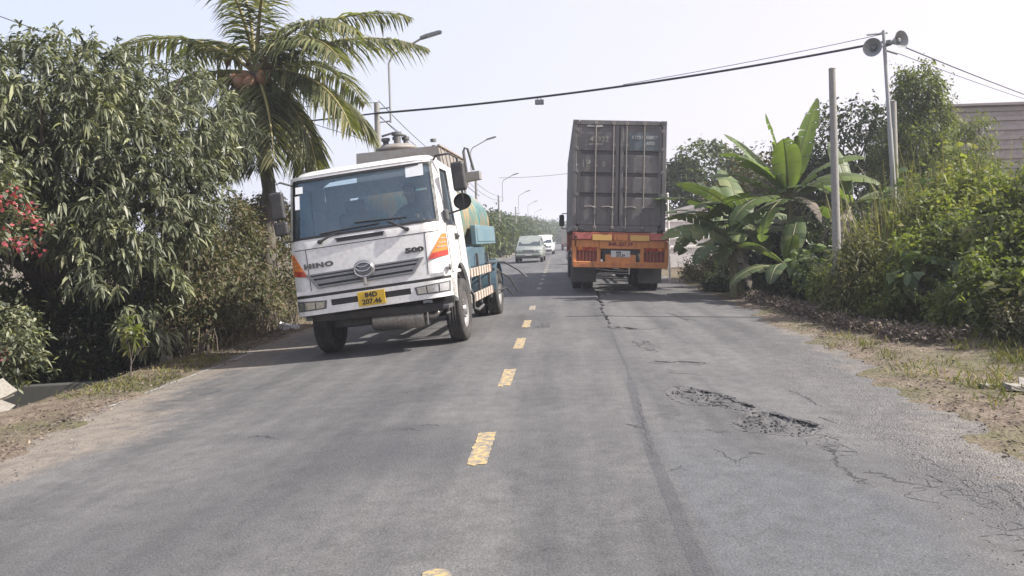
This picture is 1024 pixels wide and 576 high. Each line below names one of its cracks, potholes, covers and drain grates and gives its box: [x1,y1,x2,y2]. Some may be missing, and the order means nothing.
crack [715,449,764,464]
pothole [730,410,824,437]
crack [789,390,1024,551]
pothole [663,385,762,412]
crack [632,313,702,374]
